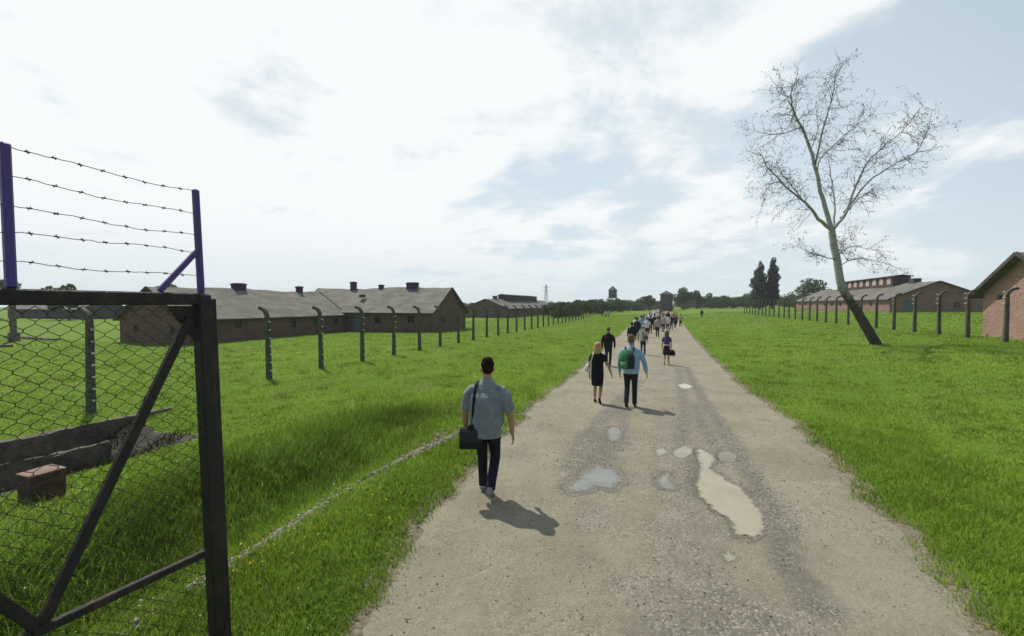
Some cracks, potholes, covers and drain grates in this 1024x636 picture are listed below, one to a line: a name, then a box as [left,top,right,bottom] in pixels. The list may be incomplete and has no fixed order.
pothole [560,463,628,496]
pothole [692,448,770,541]
pothole [671,446,694,459]
pothole [653,470,681,491]
pothole [720,549,741,562]
pothole [604,426,625,442]
